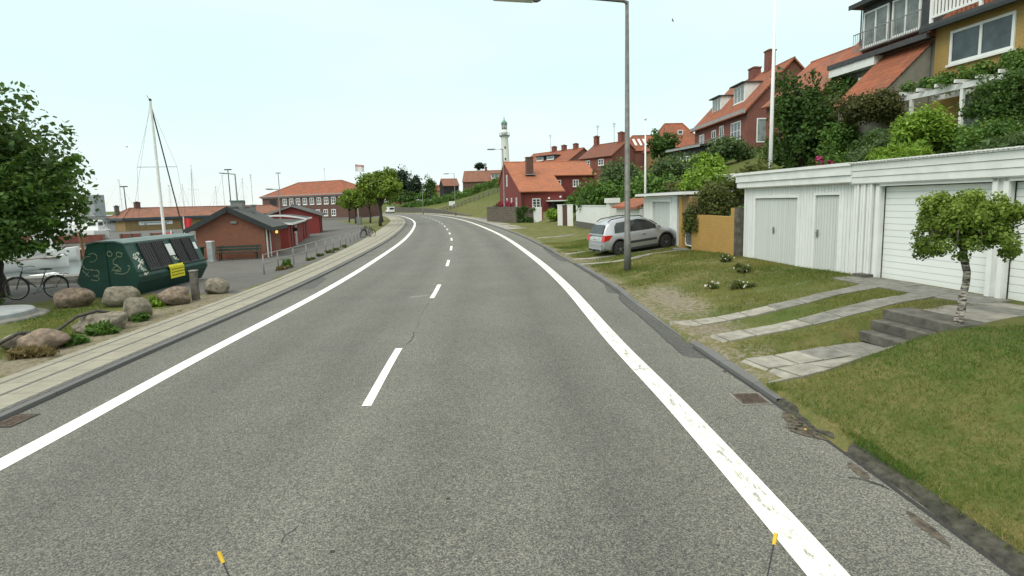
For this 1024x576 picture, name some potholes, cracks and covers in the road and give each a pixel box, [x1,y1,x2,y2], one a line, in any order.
drain grate [0,414,40,428]
pothole [782,411,827,440]
drain grate [728,392,774,405]
